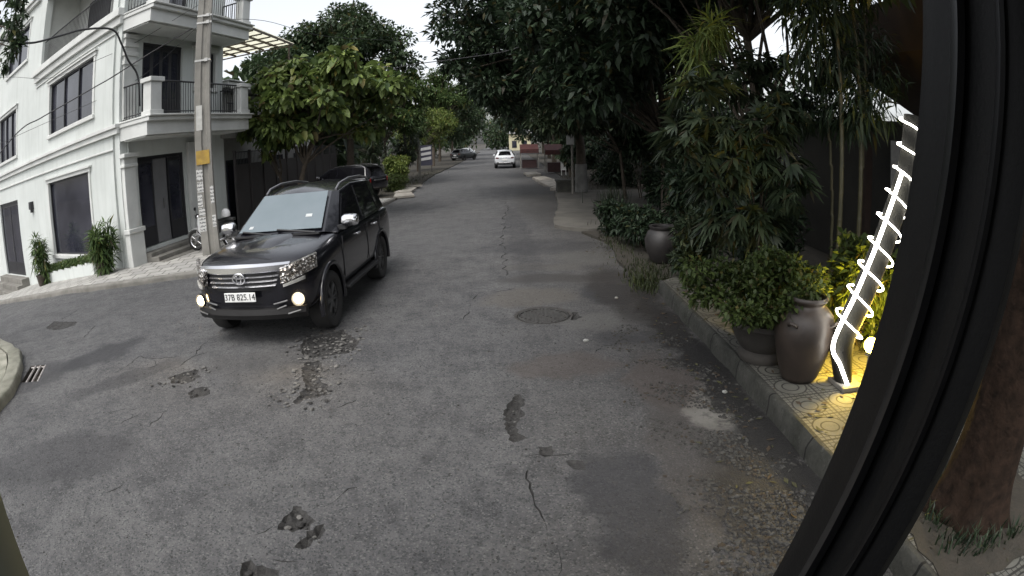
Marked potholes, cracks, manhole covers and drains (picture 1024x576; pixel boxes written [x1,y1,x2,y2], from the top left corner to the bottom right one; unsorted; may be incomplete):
drain grate [21,365,46,383]
pothole [150,366,217,387]
pothole [277,506,326,550]
pothole [188,387,210,399]
crack [103,341,208,381]
manhole cover [514,307,573,324]
pothole [268,356,346,411]
crack [524,453,595,576]
pothole [538,446,554,457]
pothole [281,325,377,362]
crack [463,204,515,319]
pothole [503,394,526,443]
